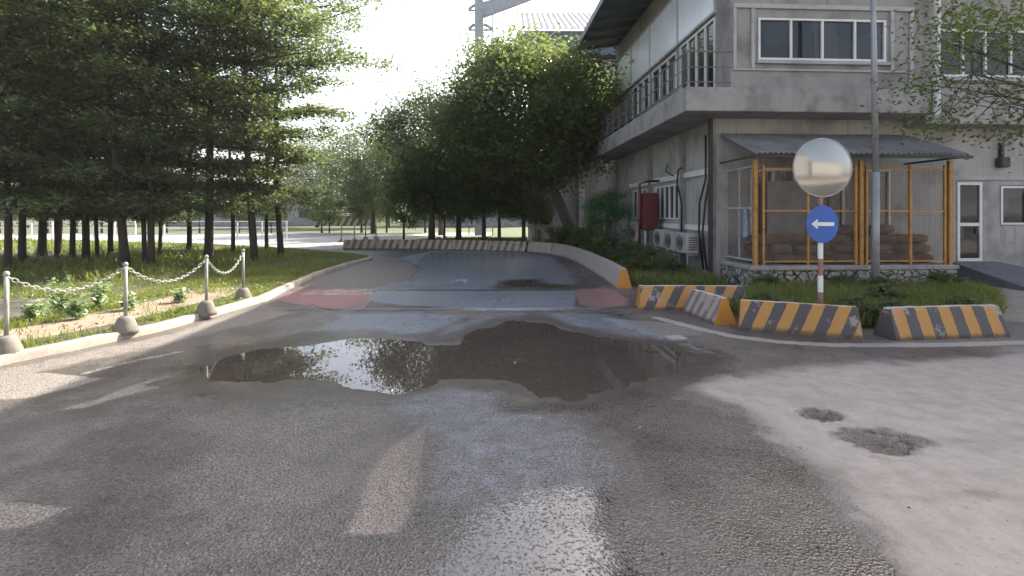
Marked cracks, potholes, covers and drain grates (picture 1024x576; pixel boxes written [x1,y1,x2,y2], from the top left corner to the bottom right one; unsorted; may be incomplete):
pothole [822,422,936,461]
pothole [792,405,851,424]
